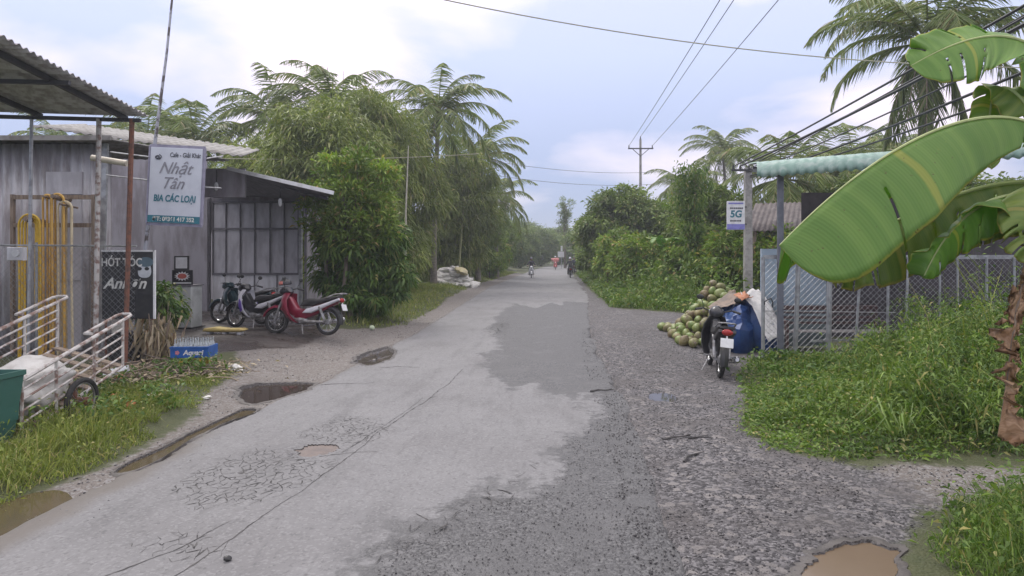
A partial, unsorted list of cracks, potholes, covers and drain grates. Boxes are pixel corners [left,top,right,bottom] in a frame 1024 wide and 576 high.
crack [105,370,462,576]
pothole [231,381,320,406]
pothole [286,442,347,460]
pothole [109,407,260,477]
pothole [351,346,398,366]
pothole [785,536,912,576]
